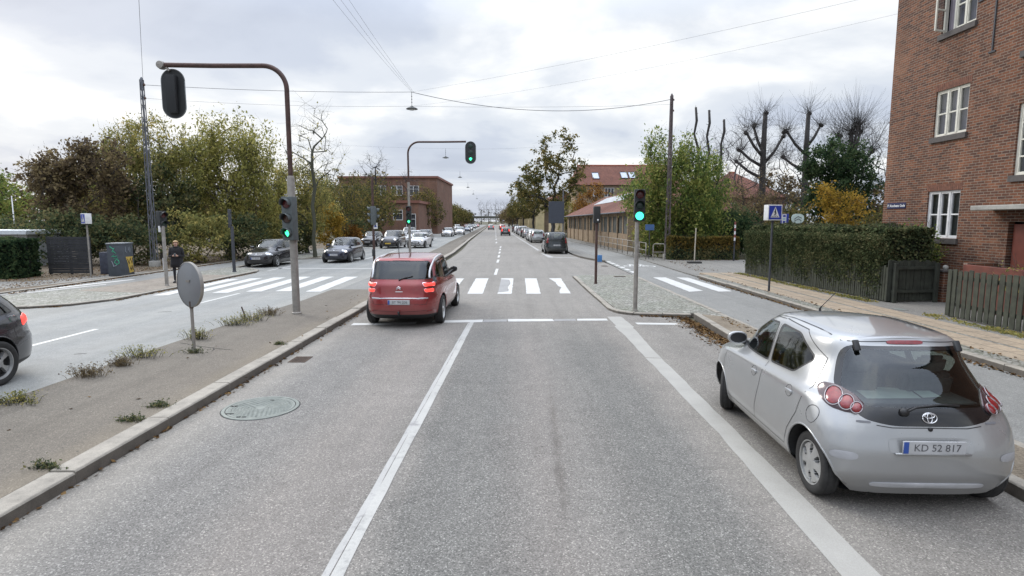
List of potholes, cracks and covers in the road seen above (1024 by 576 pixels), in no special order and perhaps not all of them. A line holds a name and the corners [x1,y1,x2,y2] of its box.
manhole cover [220,396,300,421]
